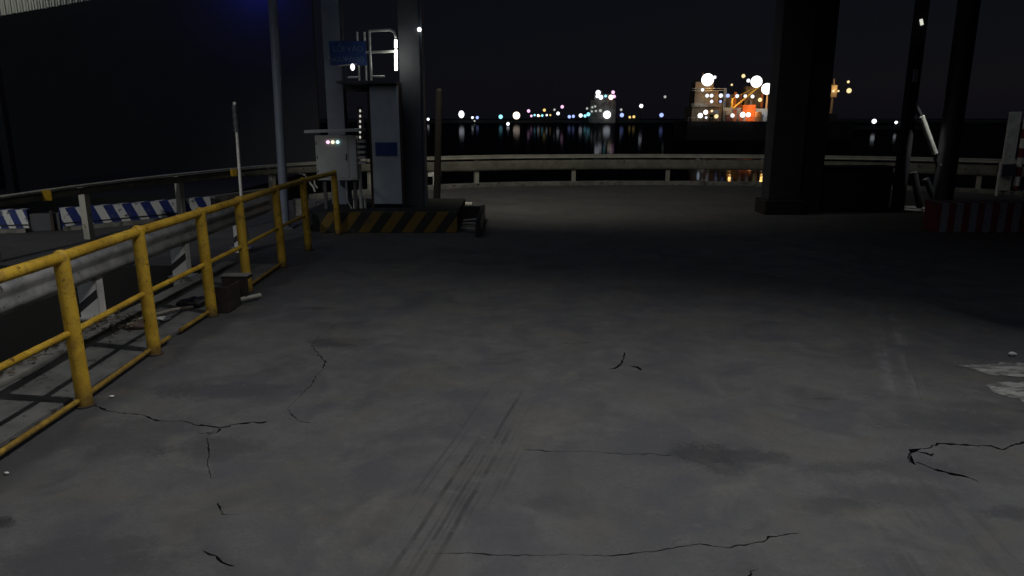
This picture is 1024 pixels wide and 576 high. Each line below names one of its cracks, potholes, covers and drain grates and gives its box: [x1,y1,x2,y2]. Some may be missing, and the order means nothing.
crack [434,533,797,556]
crack [203,551,233,566]
crack [95,406,265,478]
crack [907,442,1024,482]
crack [288,325,334,423]
